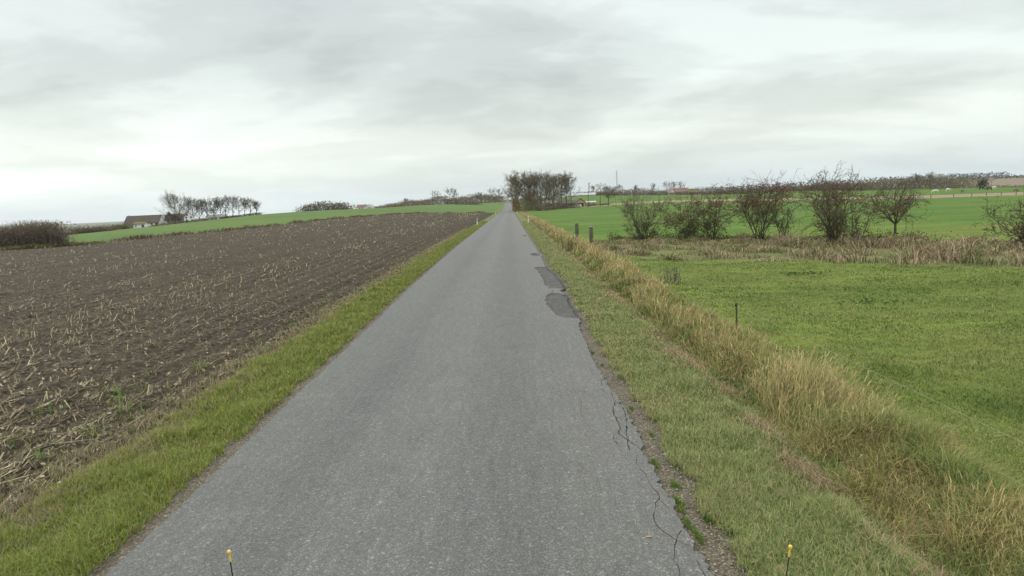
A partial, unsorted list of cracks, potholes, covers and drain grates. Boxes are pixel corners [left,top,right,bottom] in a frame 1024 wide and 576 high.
crack [592,374,706,576]
